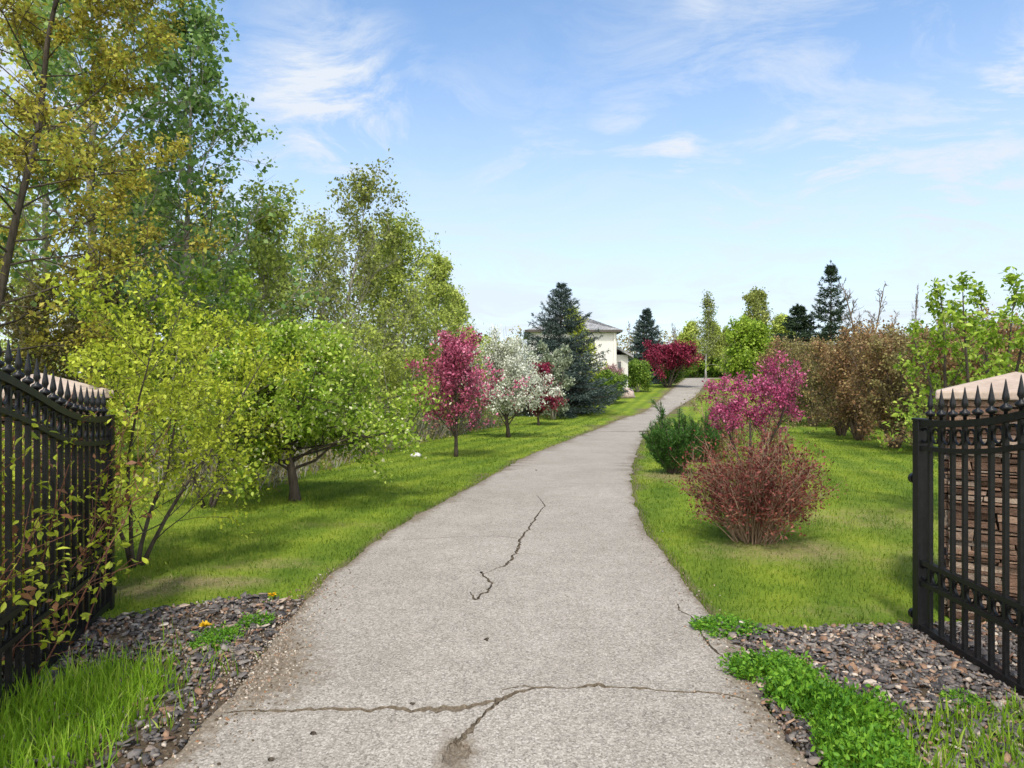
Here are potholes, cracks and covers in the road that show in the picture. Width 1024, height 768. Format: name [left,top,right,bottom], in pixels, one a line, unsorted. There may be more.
crack [678,605,723,657]
crack [407,497,545,600]
crack [224,682,754,746]
